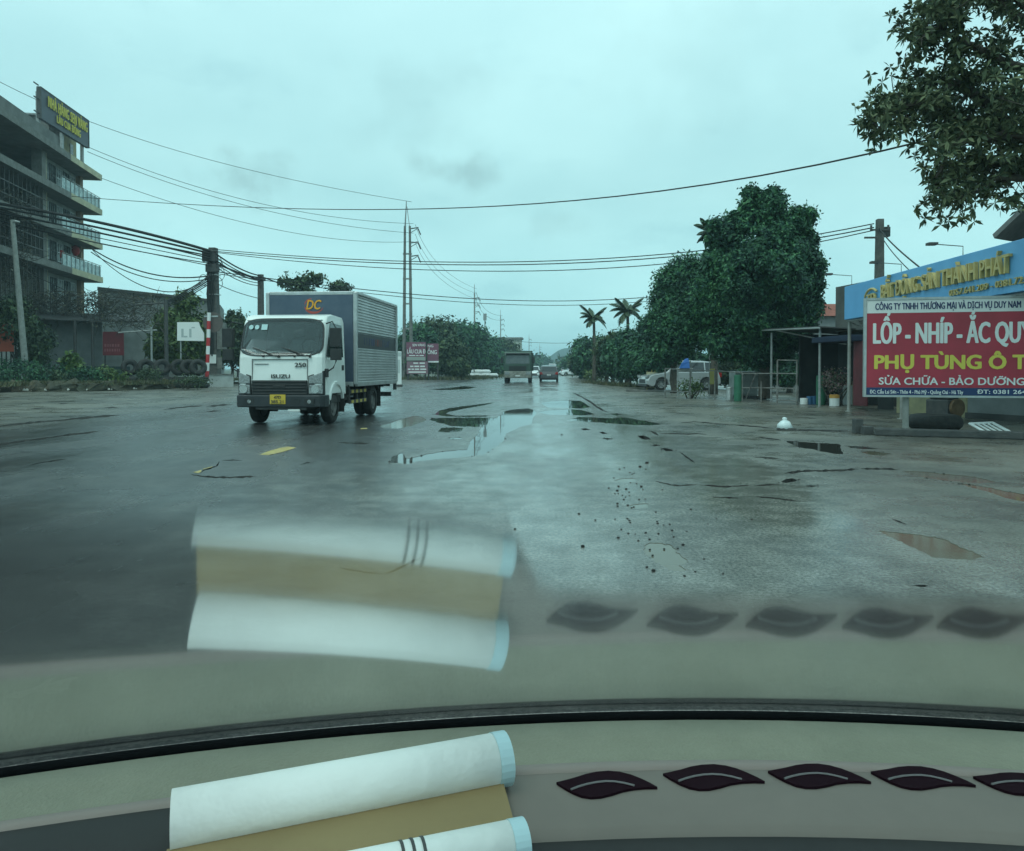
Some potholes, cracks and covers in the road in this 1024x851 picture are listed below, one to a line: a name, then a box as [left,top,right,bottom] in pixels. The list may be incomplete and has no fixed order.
crack [574,393,845,463]
crack [656,457,899,502]
crack [191,459,254,478]
pothole [380,416,426,429]
pothole [432,403,491,417]
pothole [643,543,688,572]
pothole [879,531,982,560]
pothole [786,441,843,454]
pothole [388,408,537,464]
pothole [567,417,660,425]
